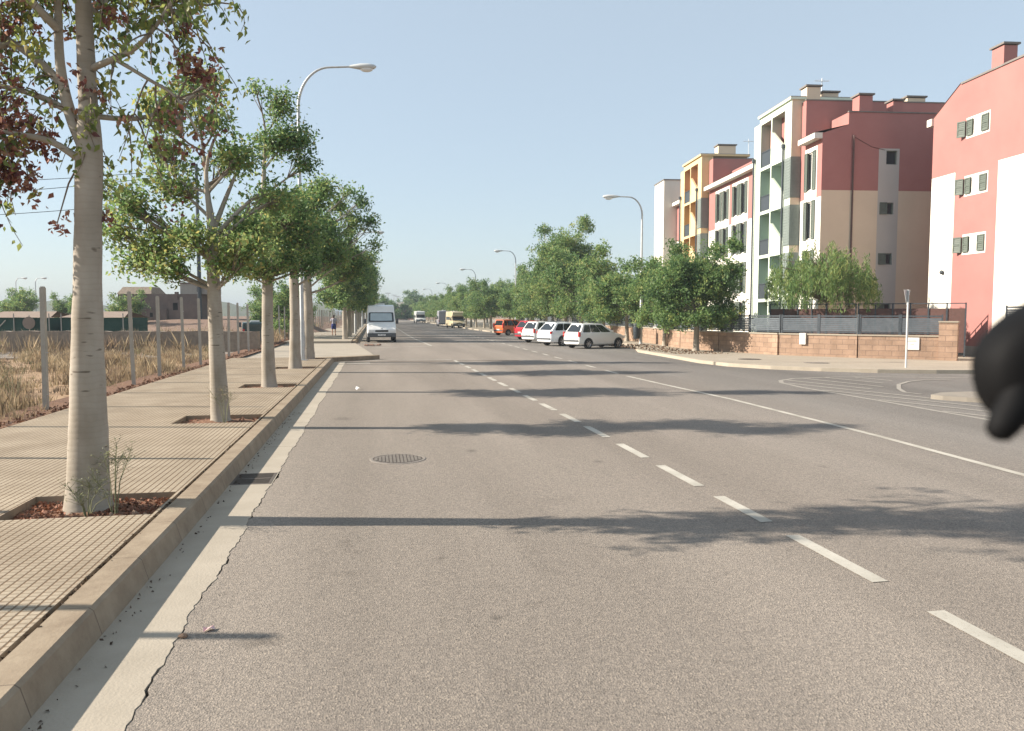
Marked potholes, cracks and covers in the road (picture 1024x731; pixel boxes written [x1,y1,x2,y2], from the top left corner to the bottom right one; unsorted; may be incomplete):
drain grate [230,473,277,485]
manhole cover [370,454,426,464]
